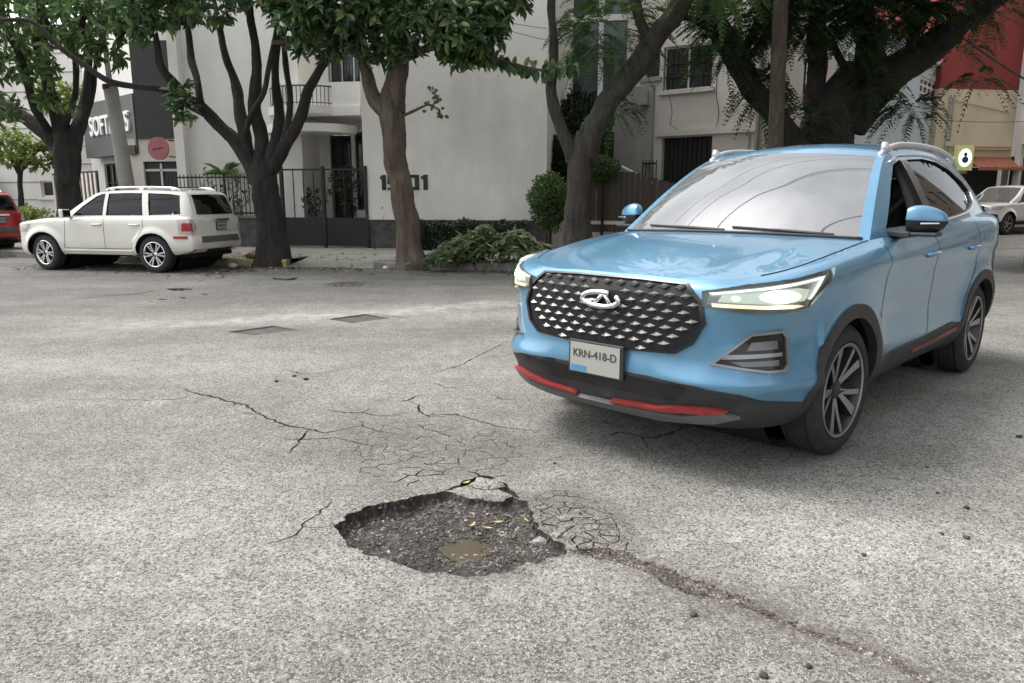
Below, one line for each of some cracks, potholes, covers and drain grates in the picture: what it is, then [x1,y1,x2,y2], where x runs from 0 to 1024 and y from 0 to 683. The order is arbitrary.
crack [263,485,332,545]
manhole cover [230,326,297,335]
manhole cover [330,314,388,323]
crack [599,420,690,448]
pothole [334,491,567,577]
crack [533,491,932,683]
crack [79,341,537,498]
